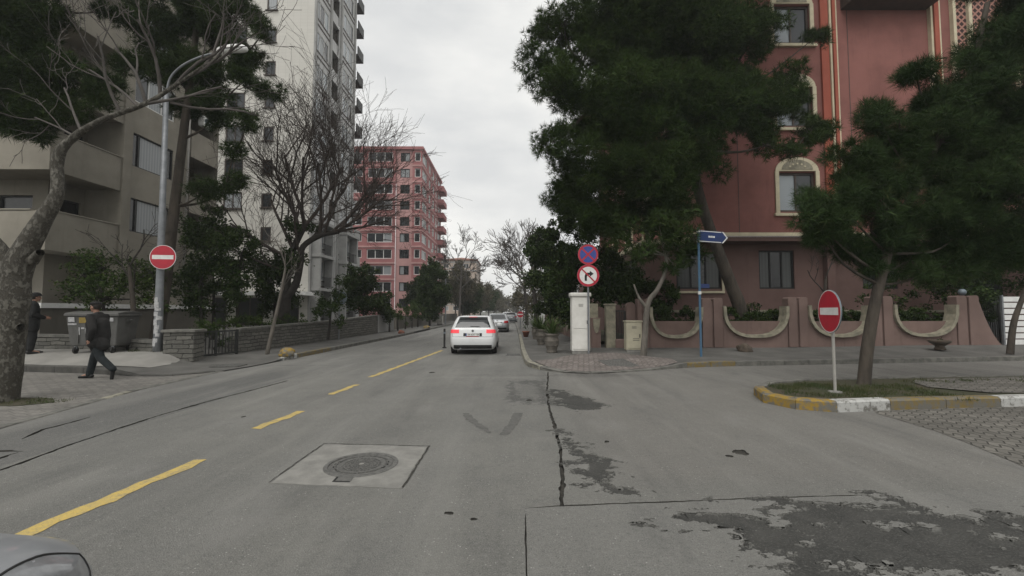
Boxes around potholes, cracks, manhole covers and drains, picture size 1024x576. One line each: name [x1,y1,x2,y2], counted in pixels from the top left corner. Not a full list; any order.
crack [0,417,89,459]
manhole cover [269,443,429,489]
crack [524,373,856,576]
